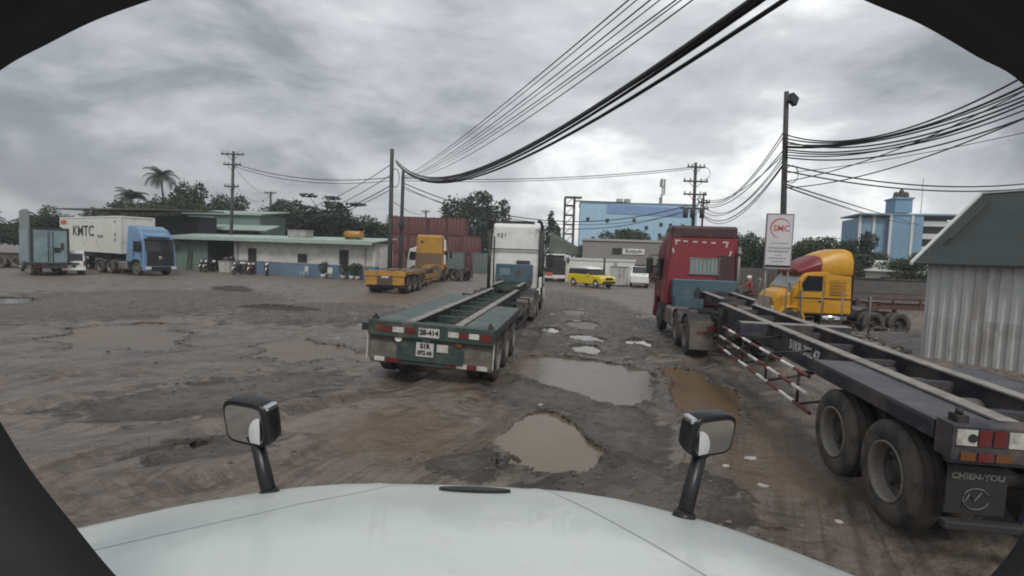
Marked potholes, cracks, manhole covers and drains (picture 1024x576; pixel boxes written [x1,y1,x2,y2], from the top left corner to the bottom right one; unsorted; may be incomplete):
pothole [560,320,605,330]
pothole [483,408,619,479]
pothole [648,365,752,431]
pothole [619,336,660,348]
pothole [239,338,380,364]
pothole [25,321,200,352]
pothole [560,333,612,343]
pothole [503,352,666,409]
pothole [236,304,327,313]
pothole [536,326,566,334]
pothole [564,343,607,355]
pothole [162,435,223,453]
